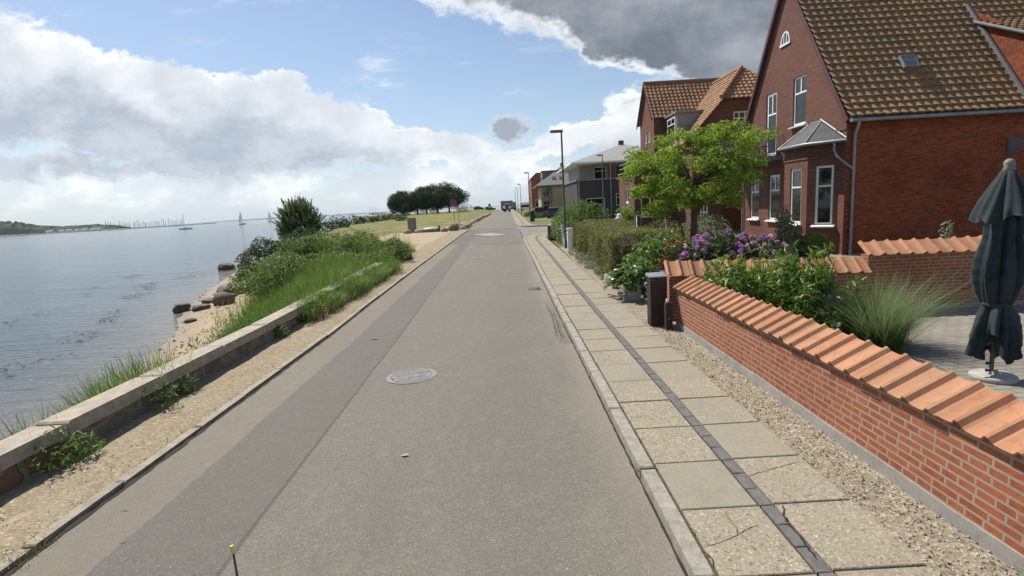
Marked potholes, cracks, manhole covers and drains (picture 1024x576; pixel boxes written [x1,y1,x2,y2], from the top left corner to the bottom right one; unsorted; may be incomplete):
manhole cover [386,368,437,384]
